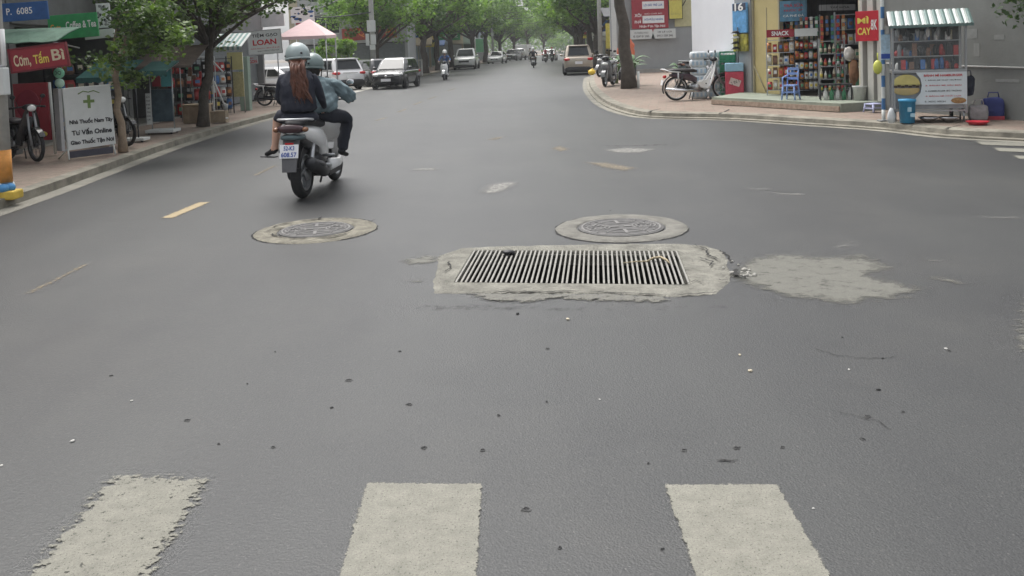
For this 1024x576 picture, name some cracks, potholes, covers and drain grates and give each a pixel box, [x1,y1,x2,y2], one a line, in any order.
drain grate [433,244,731,297]
manhole cover [555,214,688,243]
manhole cover [253,218,377,244]
